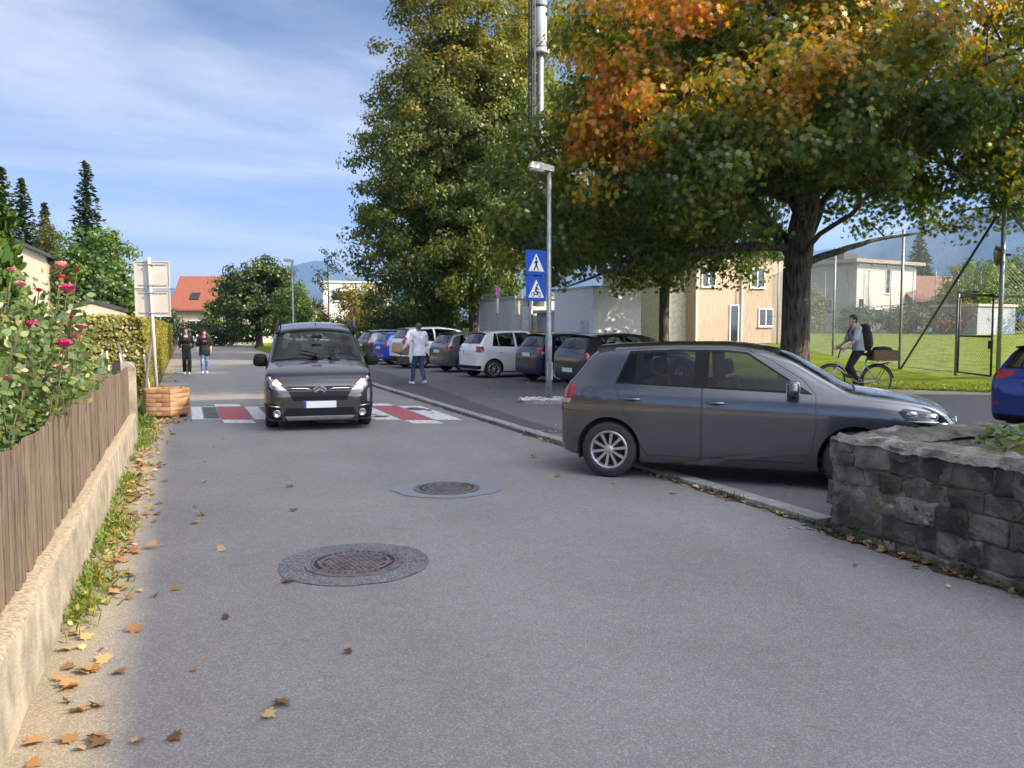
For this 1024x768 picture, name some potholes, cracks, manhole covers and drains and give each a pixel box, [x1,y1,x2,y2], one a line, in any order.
manhole cover [390,479,503,498]
manhole cover [278,543,429,586]
